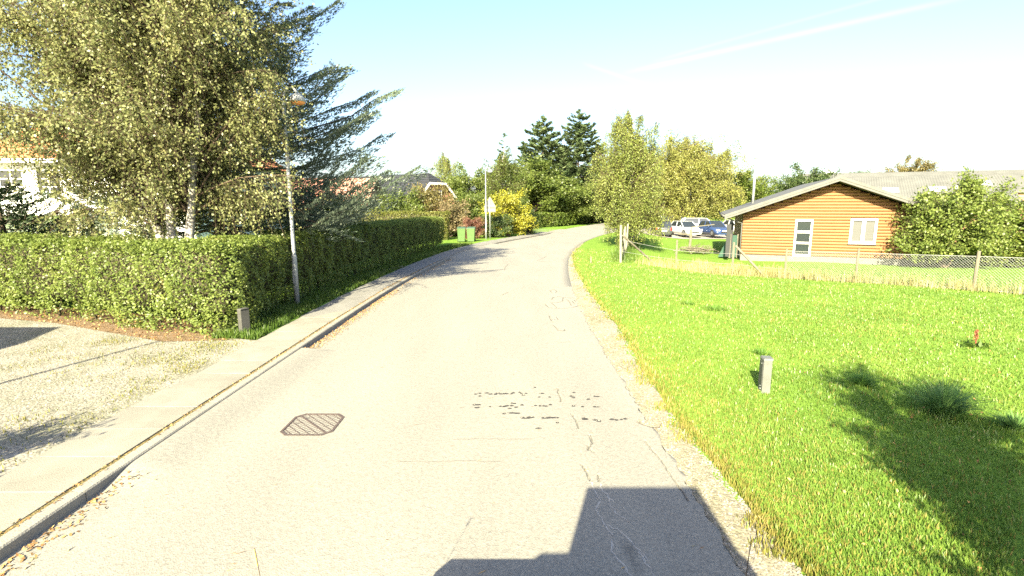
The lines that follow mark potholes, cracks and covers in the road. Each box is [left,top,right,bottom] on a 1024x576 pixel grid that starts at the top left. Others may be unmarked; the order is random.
crack [555,389,655,576]
crack [644,440,689,501]
